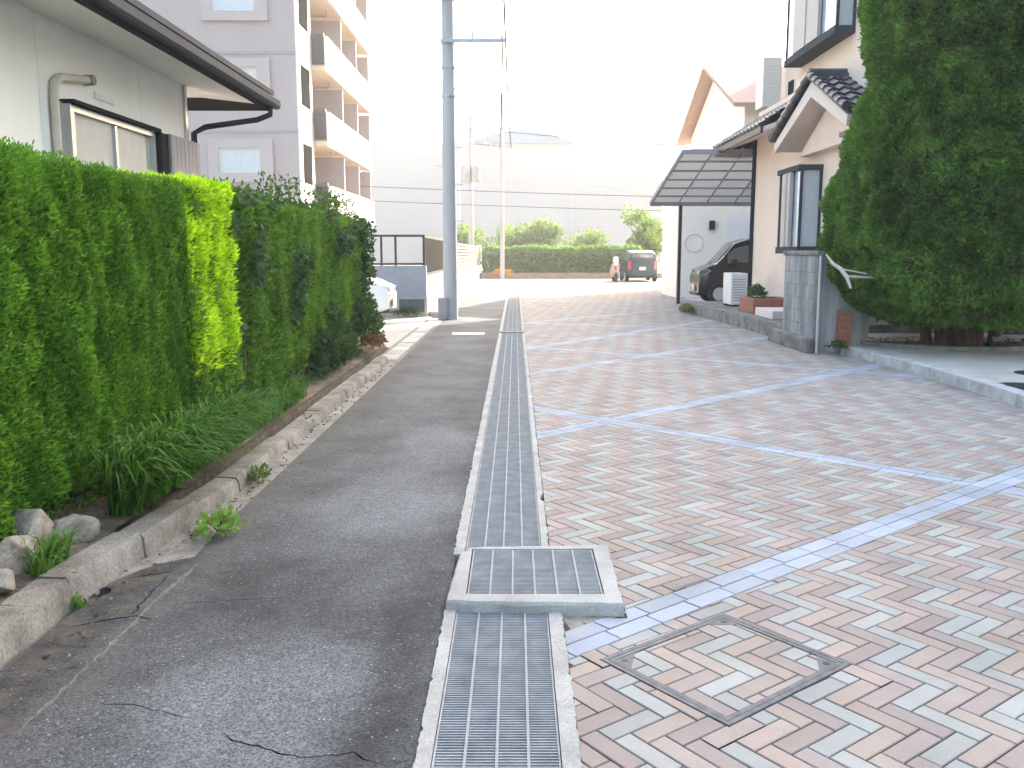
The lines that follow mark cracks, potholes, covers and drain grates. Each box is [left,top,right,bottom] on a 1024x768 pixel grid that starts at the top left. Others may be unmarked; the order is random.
drain grate [431,612,561,768]
manhole cover [601,612,851,727]
crack [0,561,257,746]
drain grate [474,461,537,499]
crack [222,732,380,764]
drain grate [494,371,526,382]
drain grate [466,499,541,551]
drain grate [497,353,525,361]
drain grate [492,382,528,395]
drain grate [485,412,531,434]
drain grate [481,433,533,461]
drain grate [496,361,526,371]
